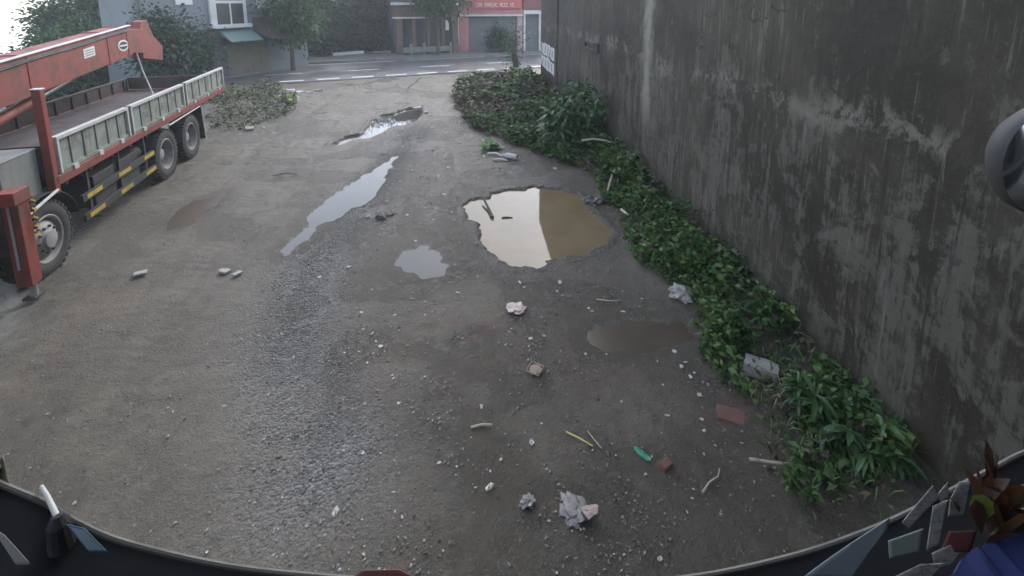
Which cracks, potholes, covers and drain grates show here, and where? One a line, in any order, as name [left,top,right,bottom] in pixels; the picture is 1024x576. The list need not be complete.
pothole [455,183,621,273]
pothole [323,105,427,147]
